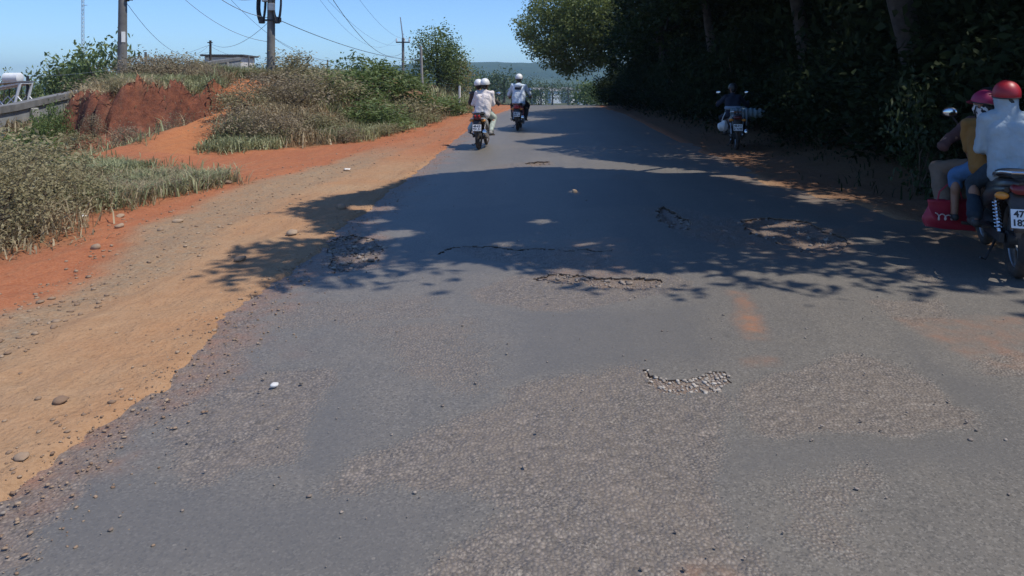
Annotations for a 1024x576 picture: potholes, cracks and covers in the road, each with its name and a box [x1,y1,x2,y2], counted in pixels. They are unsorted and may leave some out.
pothole [325,234,387,274]
crack [438,246,612,254]
pothole [642,369,732,395]
pothole [533,273,663,291]
pothole [739,217,851,253]
pothole [655,206,693,230]
